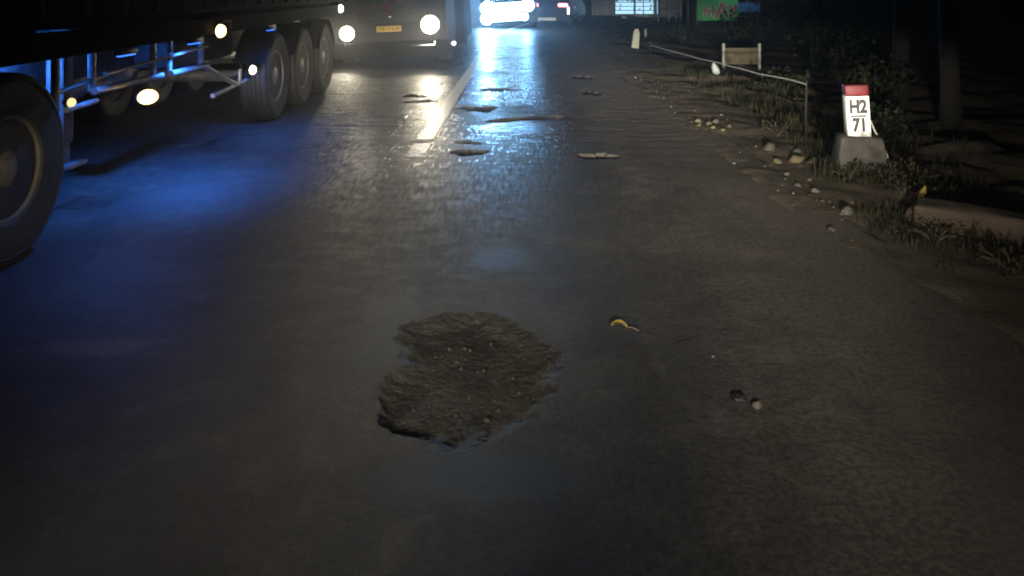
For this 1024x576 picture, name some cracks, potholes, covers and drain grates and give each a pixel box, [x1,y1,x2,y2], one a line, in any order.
pothole [449,149,492,157]
pothole [485,115,581,123]
pothole [373,312,565,454]
